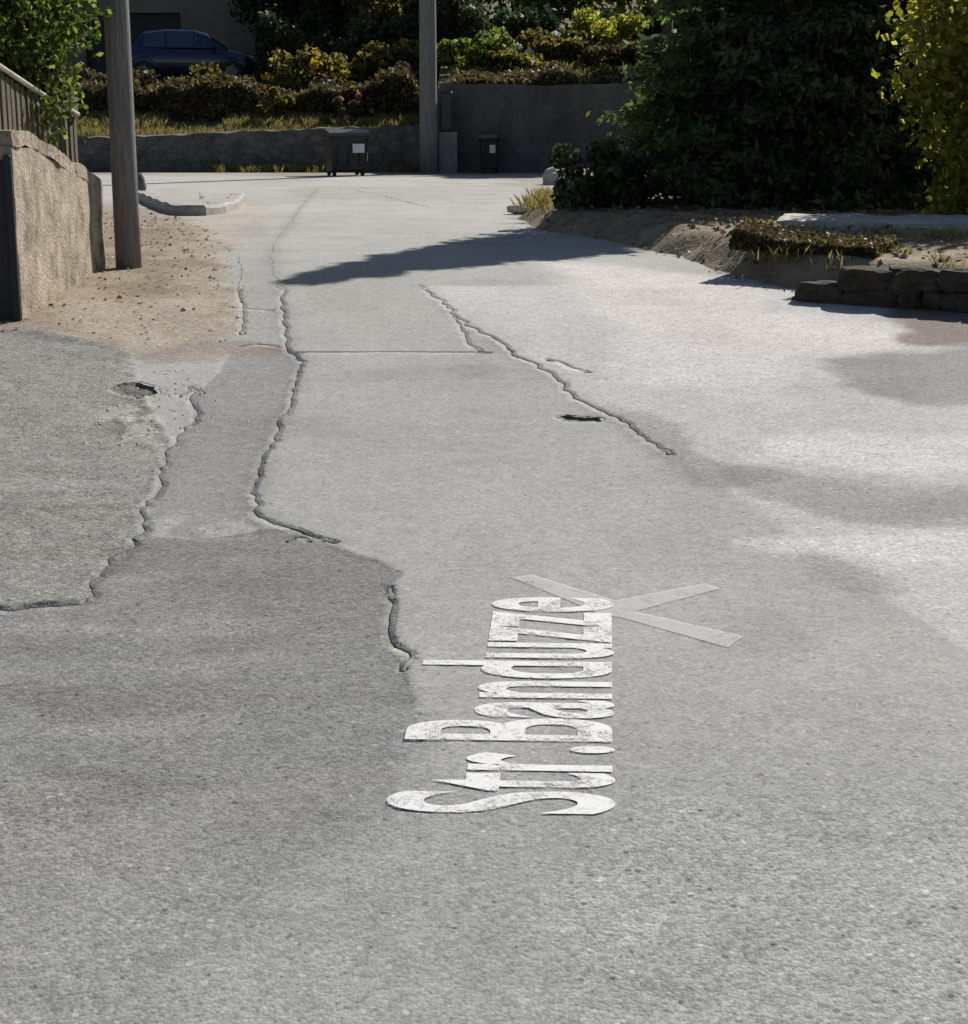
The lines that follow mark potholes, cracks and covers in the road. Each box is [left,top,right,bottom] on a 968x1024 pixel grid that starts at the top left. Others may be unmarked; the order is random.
crack [0,387,204,614]
pothole [555,415,606,423]
crack [419,285,671,455]
crack [228,188,464,544]
pothole [109,382,161,399]
crack [381,588,418,672]
